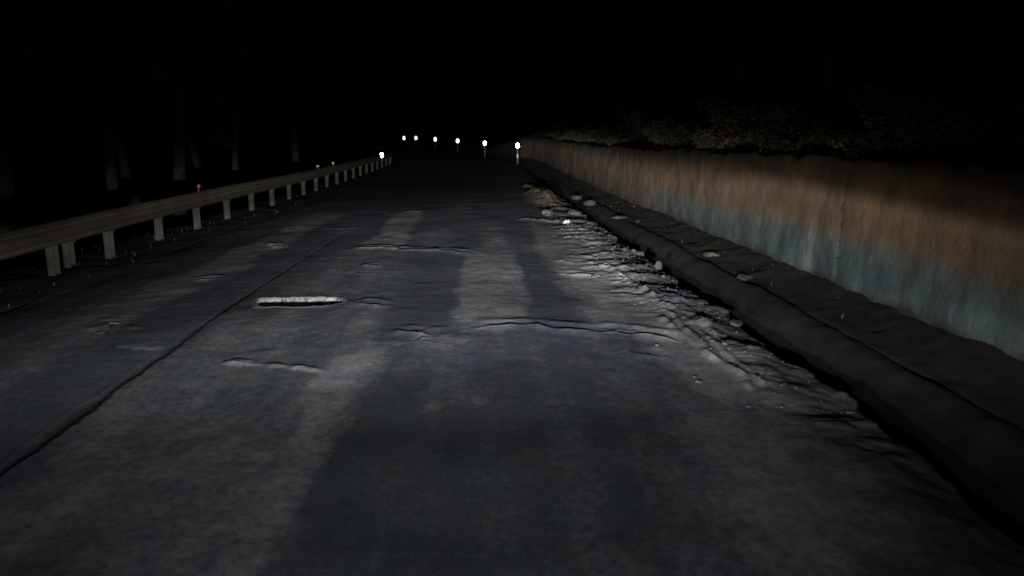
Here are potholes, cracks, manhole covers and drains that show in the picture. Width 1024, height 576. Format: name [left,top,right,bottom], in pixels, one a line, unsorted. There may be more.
crack [386,324,687,359]
crack [547,250,703,306]
pothole [250,296,349,309]
